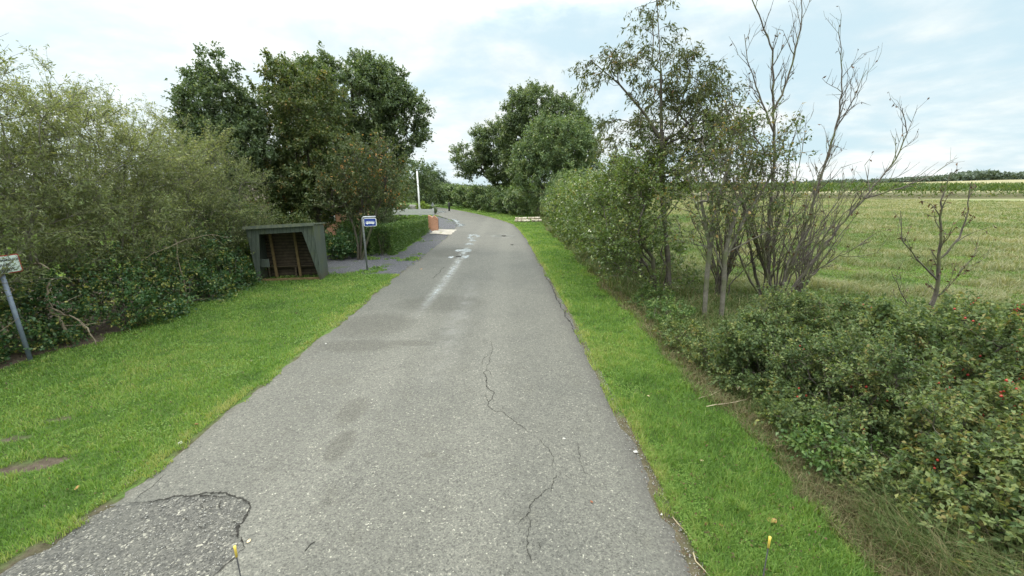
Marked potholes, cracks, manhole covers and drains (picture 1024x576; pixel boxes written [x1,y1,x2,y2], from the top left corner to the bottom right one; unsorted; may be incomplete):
crack [483,342,528,432]
crack [518,441,557,564]
